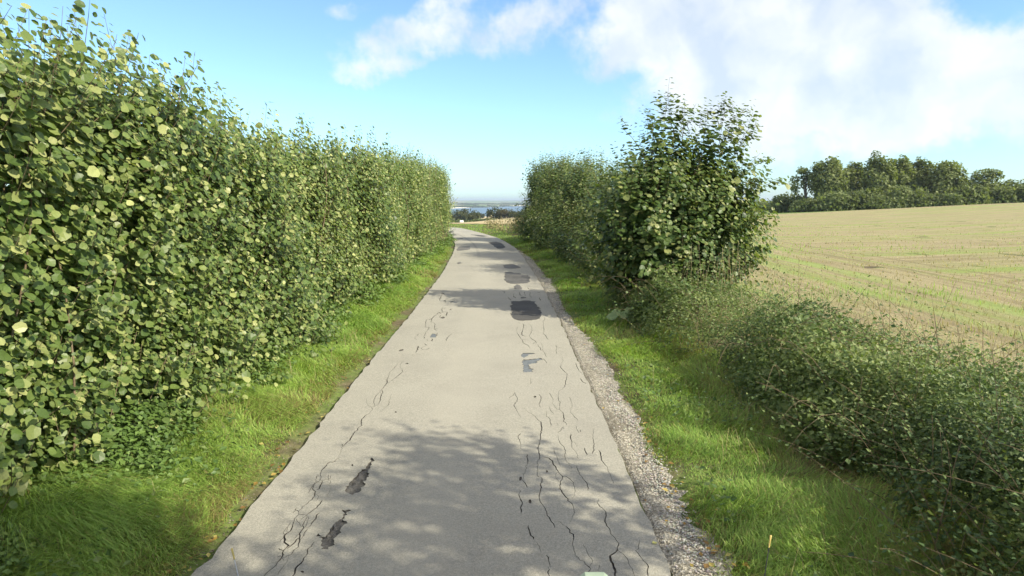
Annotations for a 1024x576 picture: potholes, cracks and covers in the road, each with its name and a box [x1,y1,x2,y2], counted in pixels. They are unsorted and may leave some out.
crack [264,364,403,576]
pothole [317,510,351,549]
crack [509,322,649,576]
pothole [345,458,375,495]
